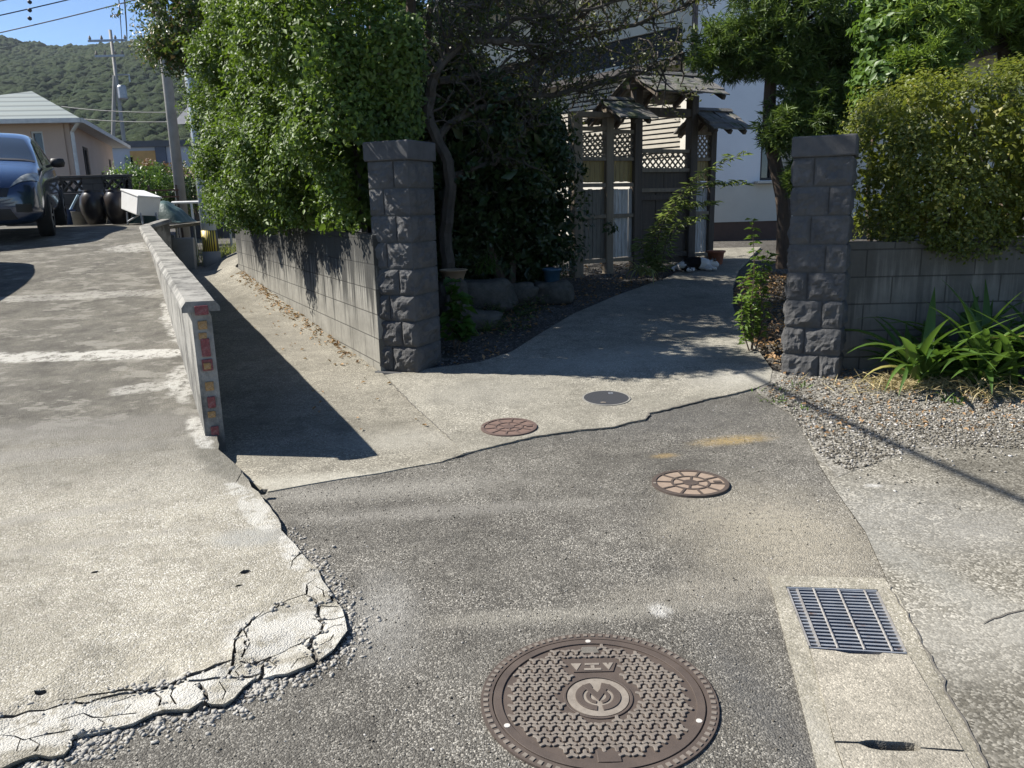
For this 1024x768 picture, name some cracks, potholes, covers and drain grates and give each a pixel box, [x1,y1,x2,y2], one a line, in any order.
manhole cover [652,470,730,498]
manhole cover [481,633,719,768]
manhole cover [481,418,537,437]
crack [2,554,338,752]
manhole cover [582,390,631,406]
drain grate [786,587,907,655]
